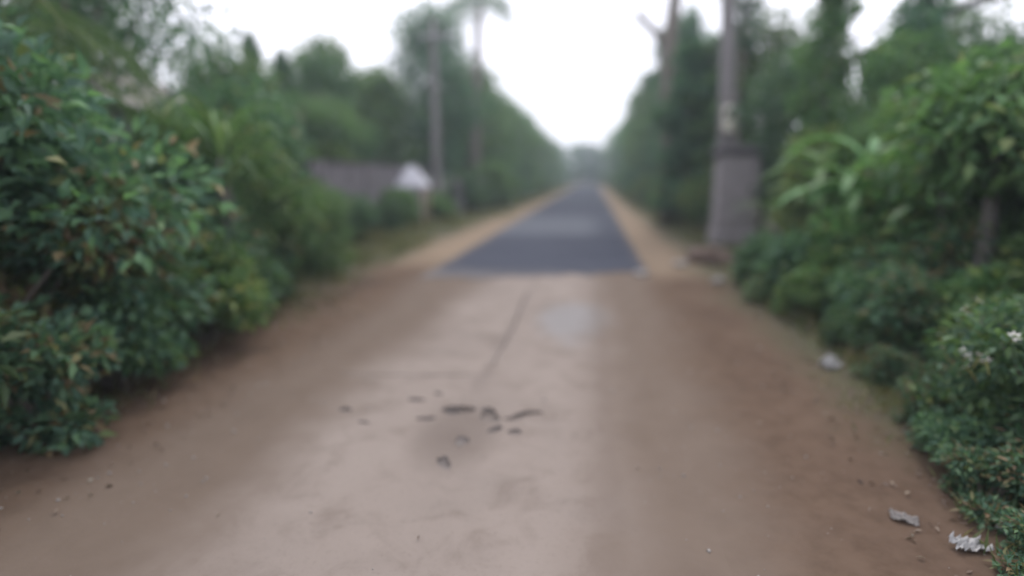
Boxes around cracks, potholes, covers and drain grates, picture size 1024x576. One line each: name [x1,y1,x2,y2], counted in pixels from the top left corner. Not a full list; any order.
pothole [437,456,451,470]
pothole [440,405,477,415]
pothole [455,436,470,446]
pothole [504,411,543,421]
pothole [480,407,500,421]
crack [343,289,529,382]
